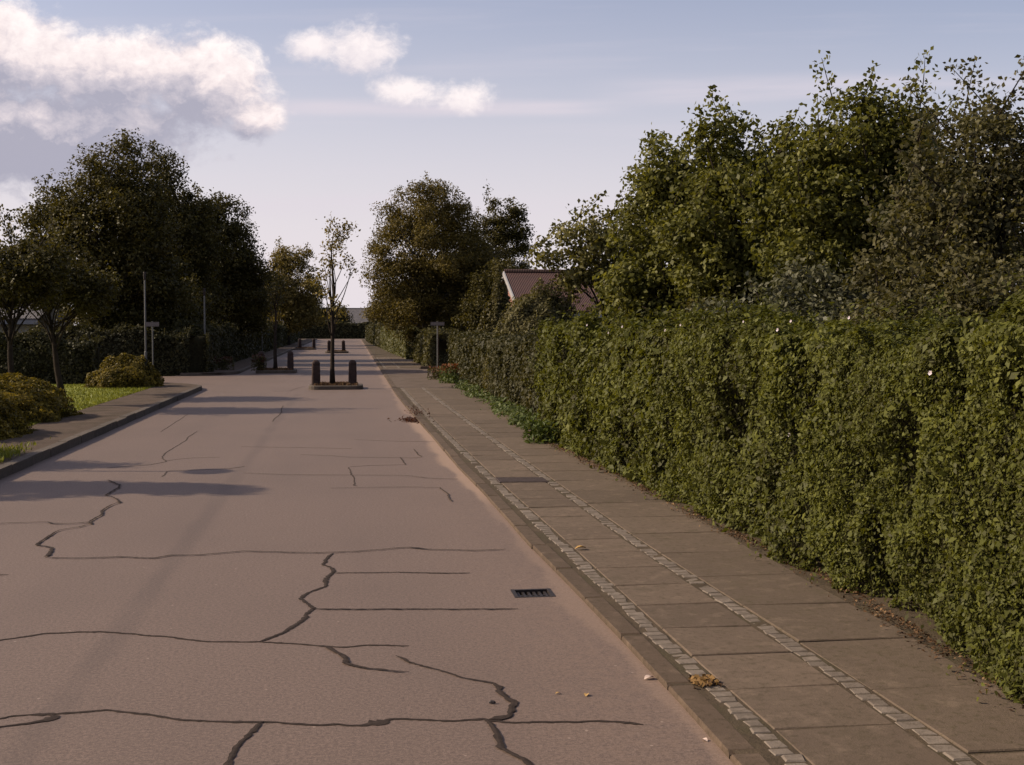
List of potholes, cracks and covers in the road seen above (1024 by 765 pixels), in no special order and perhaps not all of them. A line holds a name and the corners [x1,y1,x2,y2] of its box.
crack [0,415,643,765]
